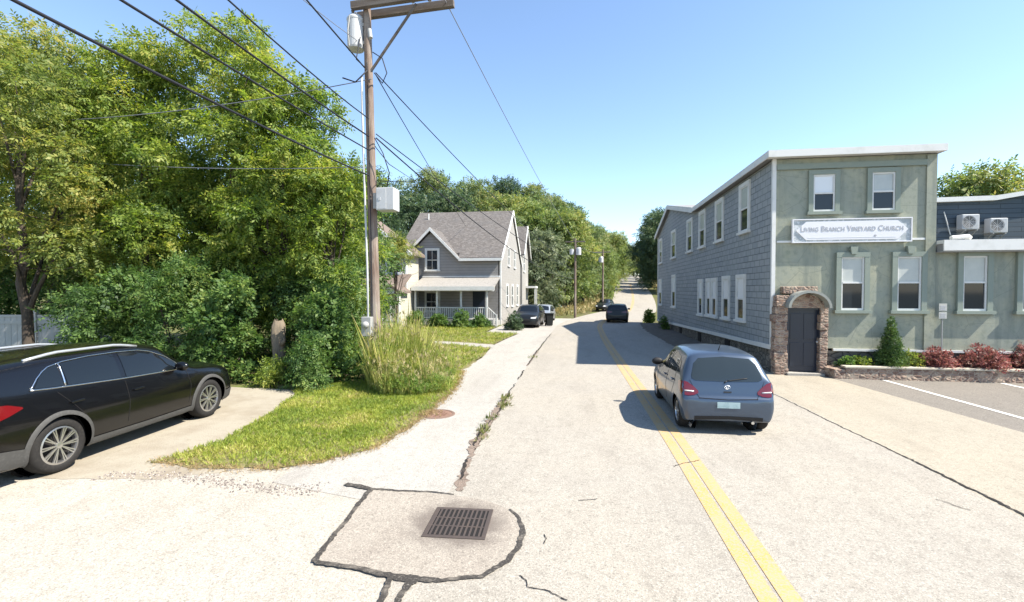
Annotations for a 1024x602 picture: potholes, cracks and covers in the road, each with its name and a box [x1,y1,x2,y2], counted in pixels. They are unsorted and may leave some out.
manhole cover [420,409,455,419]
crack [519,575,567,600]
crack [454,334,551,491]
drain grate [421,507,493,540]
